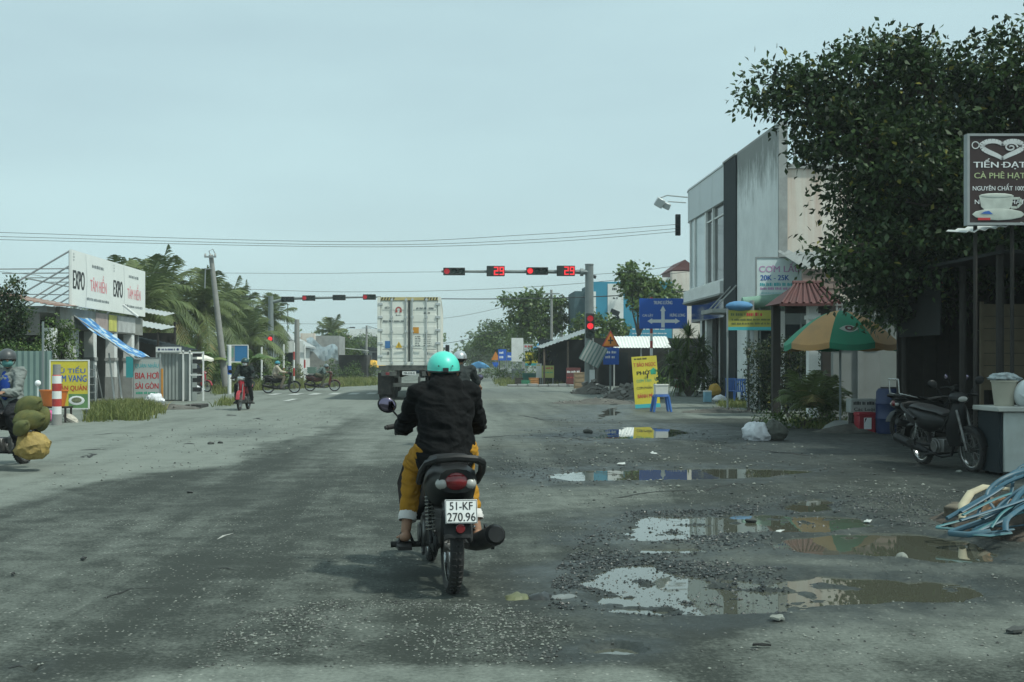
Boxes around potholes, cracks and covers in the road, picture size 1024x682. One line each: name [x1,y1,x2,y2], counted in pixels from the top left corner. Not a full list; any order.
pothole [559,557,996,616]
pothole [570,423,706,439]
pothole [604,510,899,541]
pothole [757,527,1017,563]
pothole [533,465,833,481]
